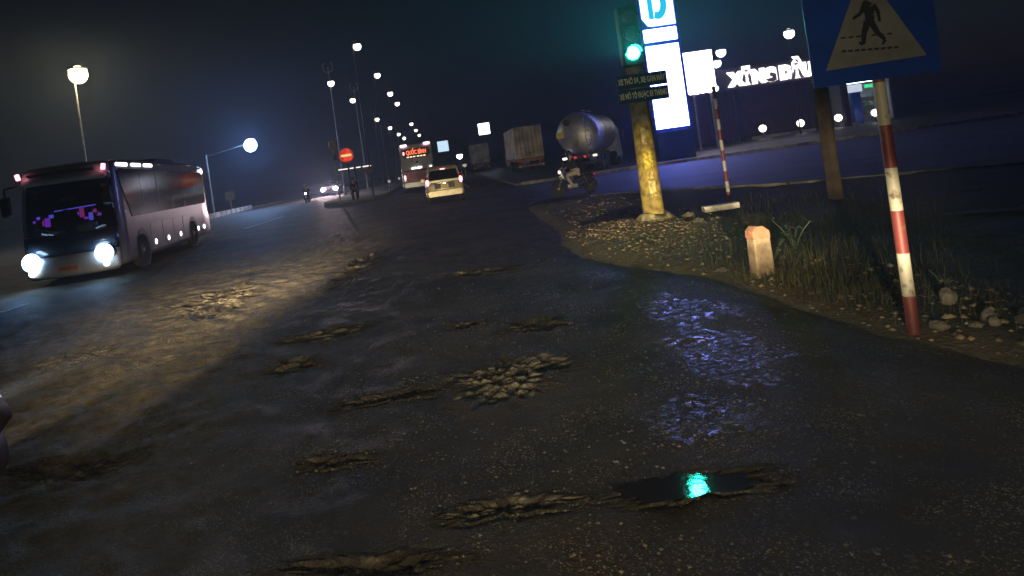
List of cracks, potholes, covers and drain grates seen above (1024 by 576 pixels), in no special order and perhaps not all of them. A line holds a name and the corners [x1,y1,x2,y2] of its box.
pothole [251,319,392,348]
pothole [422,488,604,530]
pothole [576,463,803,511]
pothole [410,343,608,425]
pothole [485,313,591,337]
pothole [144,278,273,333]
pothole [437,263,540,282]
pothole [245,546,488,576]
pothole [312,382,477,413]
pothole [294,453,389,473]
